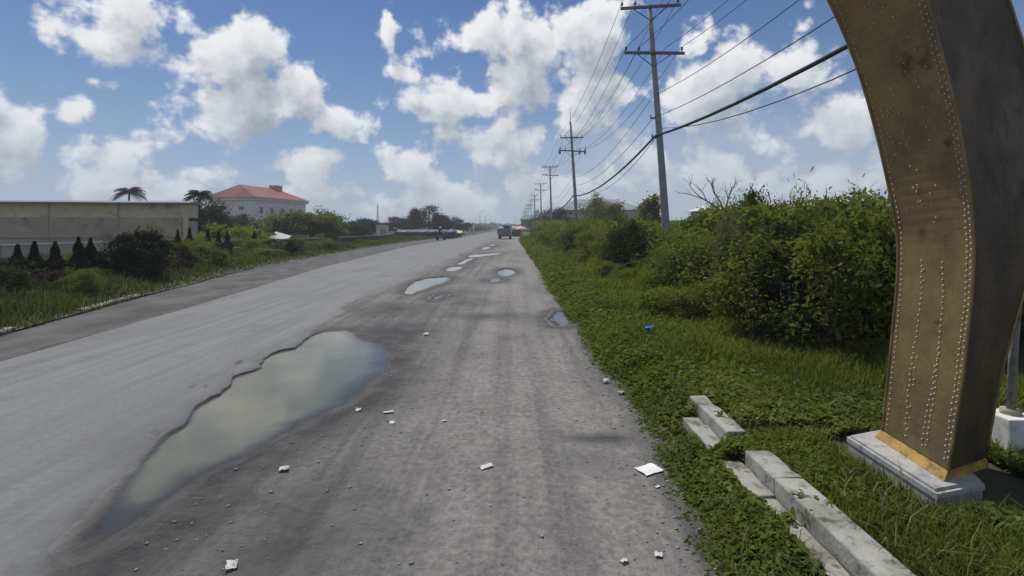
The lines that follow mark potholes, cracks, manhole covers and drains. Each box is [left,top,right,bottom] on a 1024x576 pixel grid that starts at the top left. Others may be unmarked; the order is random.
pothole [403,276,454,295]
pothole [427,293,451,301]
pothole [496,268,517,276]
pothole [545,309,578,327]
pothole [46,330,394,566]
